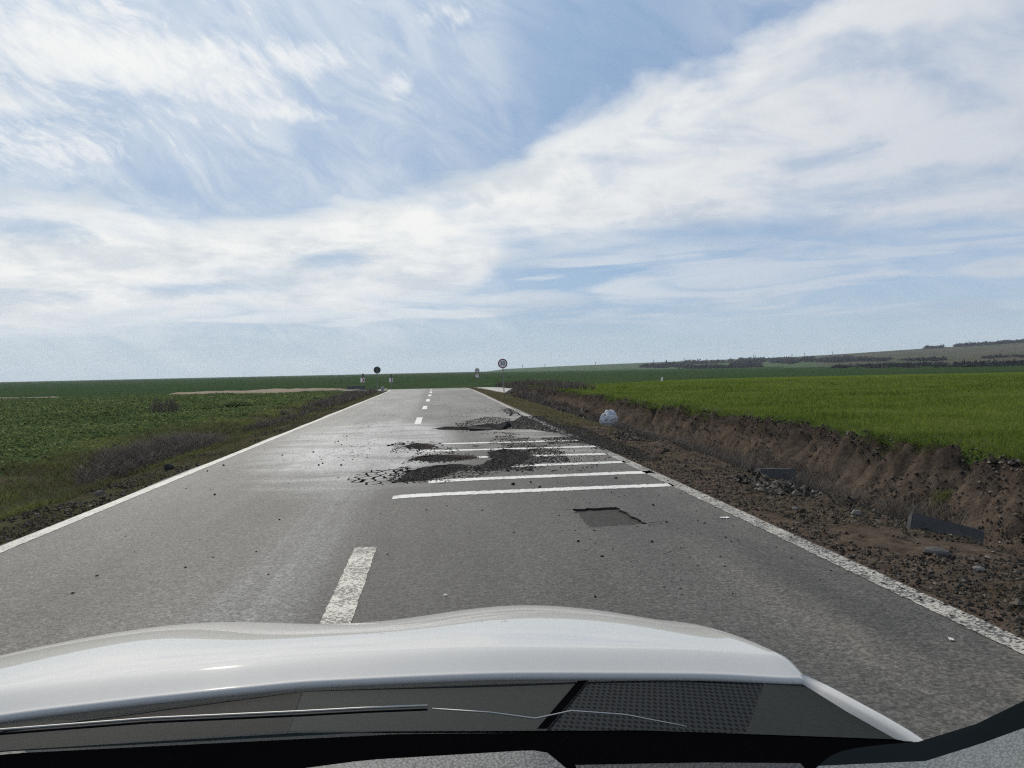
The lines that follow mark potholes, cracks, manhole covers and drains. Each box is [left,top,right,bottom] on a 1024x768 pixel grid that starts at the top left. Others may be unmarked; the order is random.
crack [348,441,445,485]
pothole [470,449,536,471]
pothole [410,454,478,462]
pothole [394,464,474,482]
pothole [573,507,646,528]
